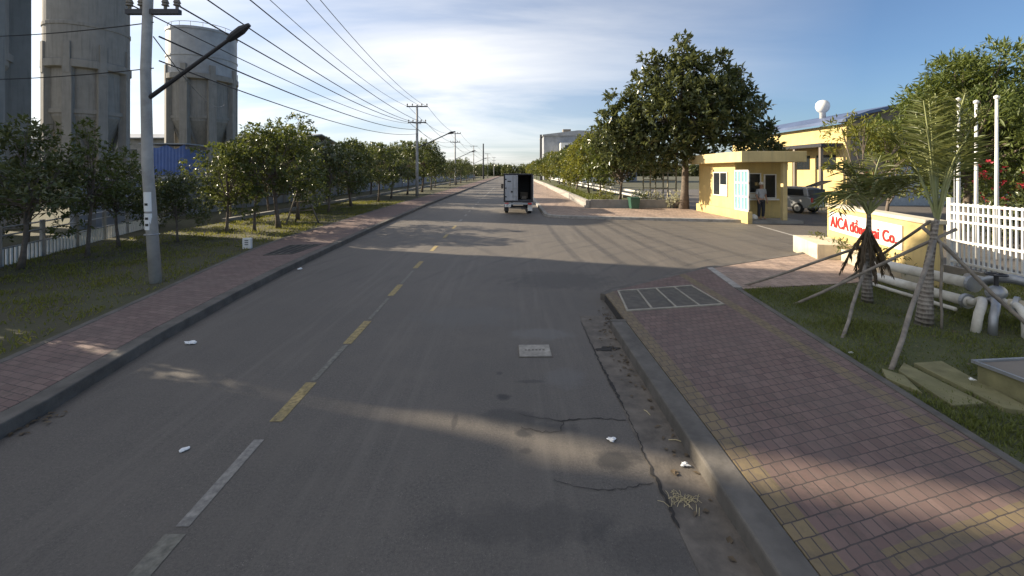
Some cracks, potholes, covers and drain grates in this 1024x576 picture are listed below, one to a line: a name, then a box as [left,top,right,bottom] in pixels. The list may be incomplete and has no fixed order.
manhole cover [518,344,553,358]
crack [553,478,652,490]
crack [522,414,617,433]
